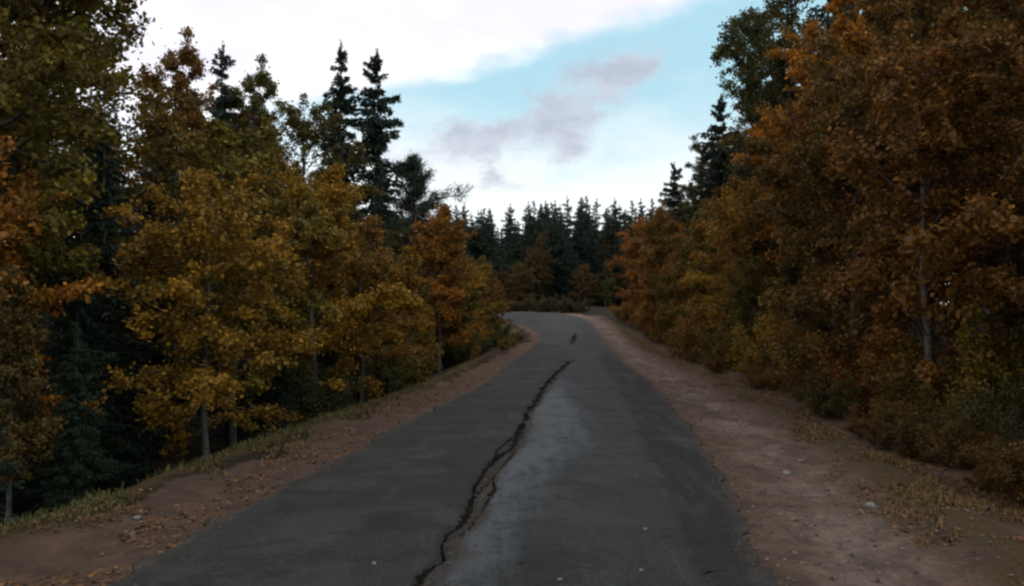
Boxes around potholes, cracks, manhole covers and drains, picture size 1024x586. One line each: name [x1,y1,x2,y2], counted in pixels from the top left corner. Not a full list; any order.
crack [412,361,573,586]
